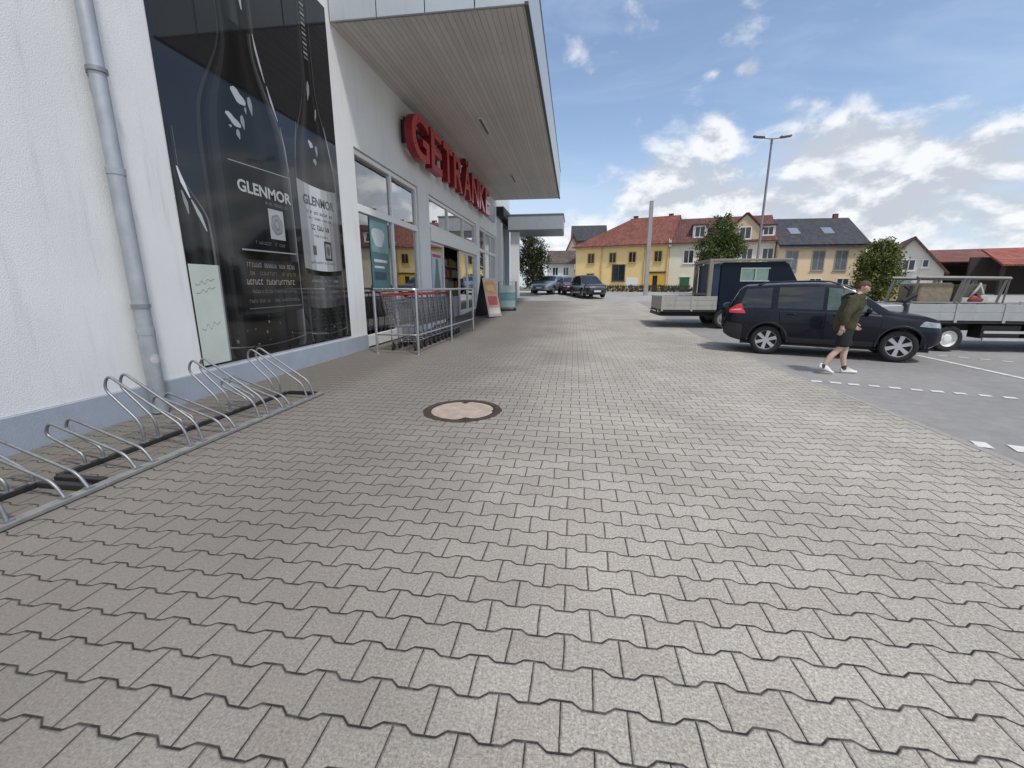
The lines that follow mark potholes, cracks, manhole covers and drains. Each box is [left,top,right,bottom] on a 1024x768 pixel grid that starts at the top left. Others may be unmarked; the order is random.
manhole cover [423,400,502,422]
